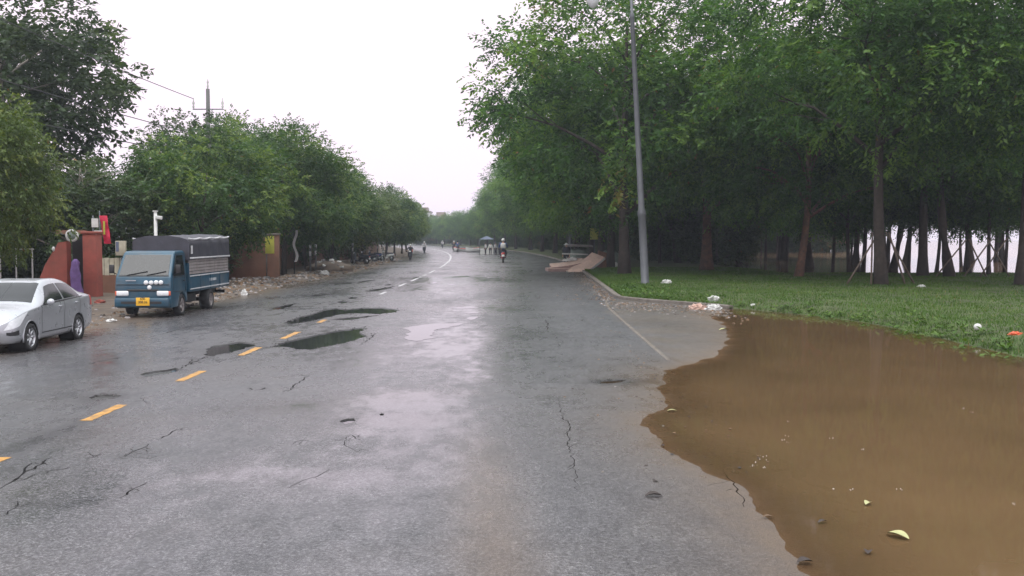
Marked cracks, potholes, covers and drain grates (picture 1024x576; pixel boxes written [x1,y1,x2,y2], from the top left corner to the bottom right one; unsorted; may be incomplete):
crack [558,399,605,490]
crack [0,427,187,517]
pothole [203,342,256,356]
pothole [280,307,405,324]
pothole [265,326,373,350]
